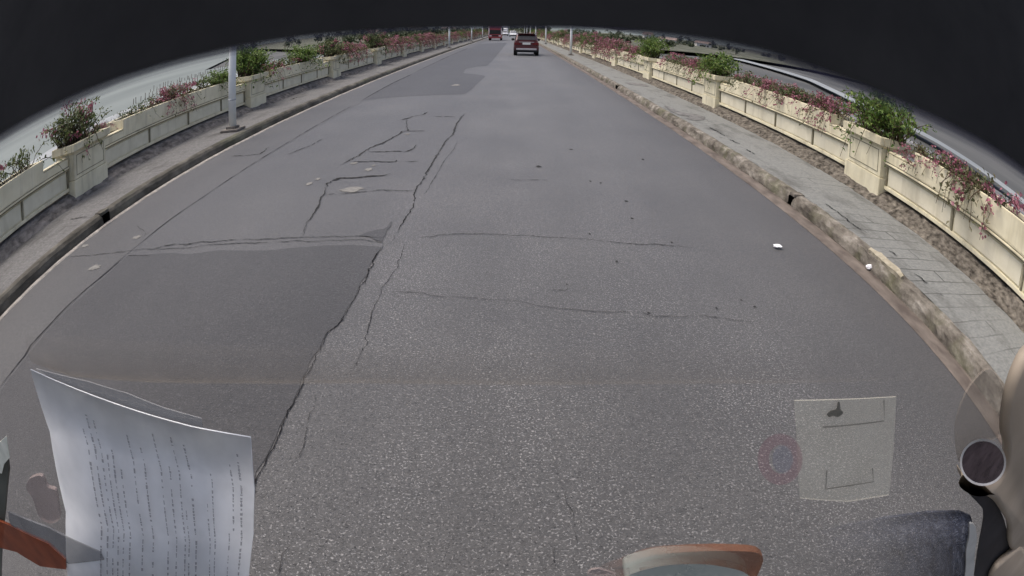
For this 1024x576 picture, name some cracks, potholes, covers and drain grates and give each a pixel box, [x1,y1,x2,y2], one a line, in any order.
crack [71,112,753,484]
